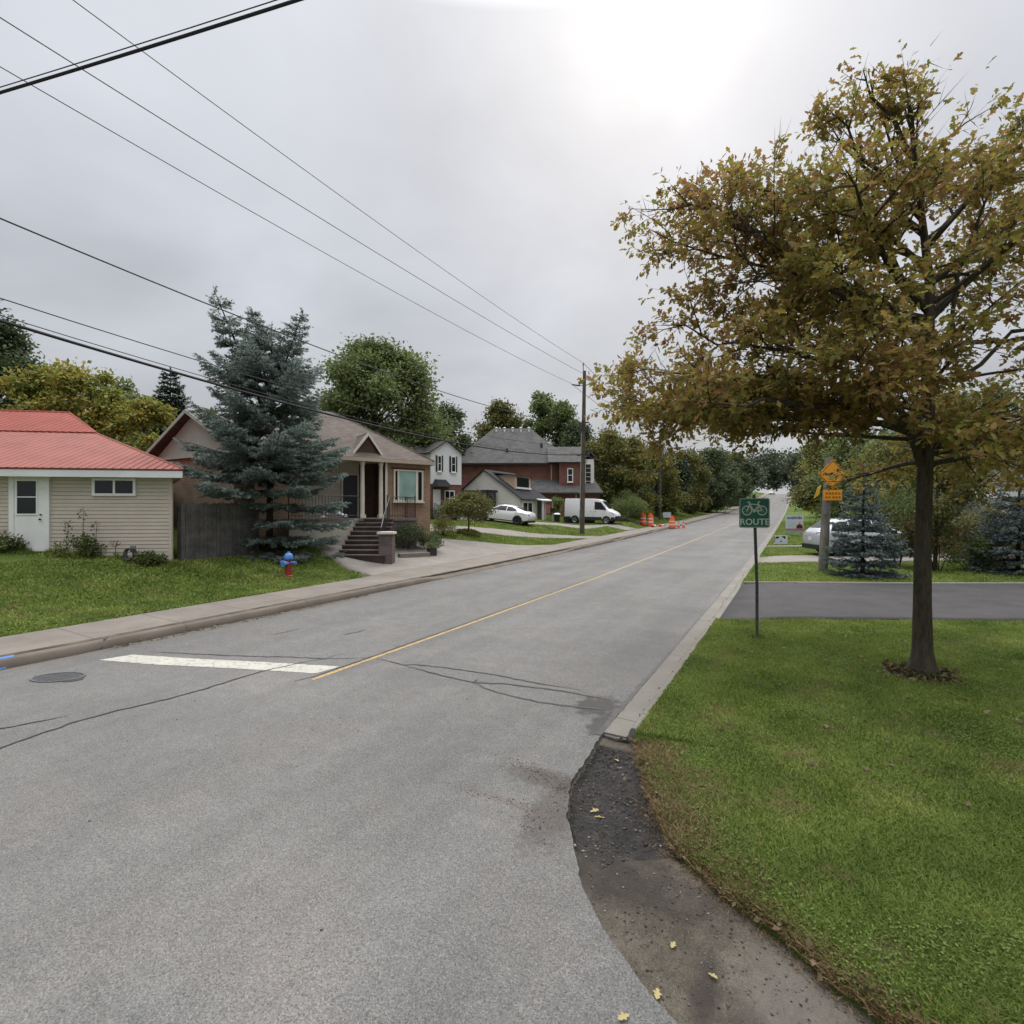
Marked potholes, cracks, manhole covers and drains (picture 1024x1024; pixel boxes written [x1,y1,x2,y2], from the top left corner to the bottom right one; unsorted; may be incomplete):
crack [152,576,615,710]
crack [0,653,342,748]
manhole cover [30,672,86,683]
